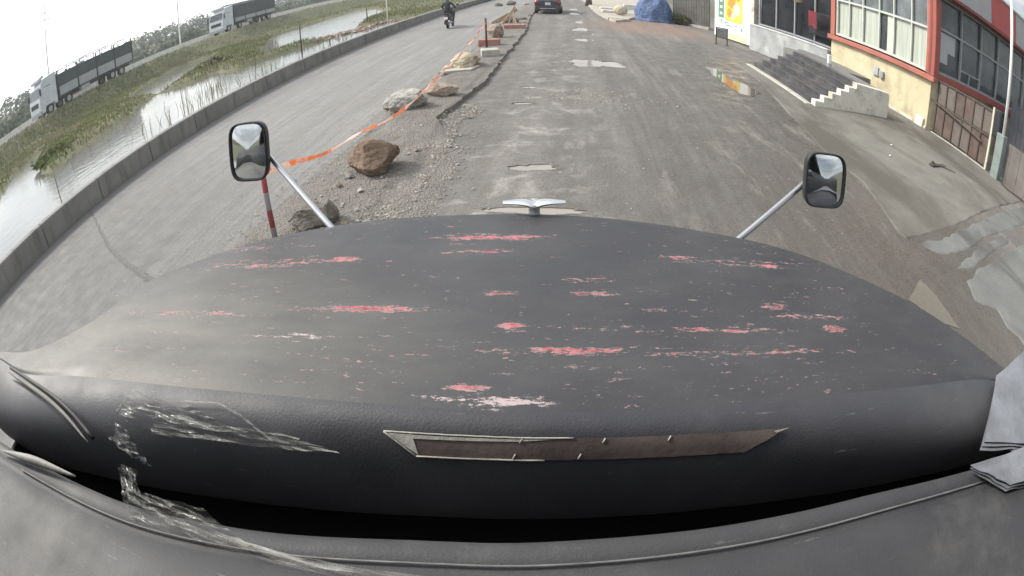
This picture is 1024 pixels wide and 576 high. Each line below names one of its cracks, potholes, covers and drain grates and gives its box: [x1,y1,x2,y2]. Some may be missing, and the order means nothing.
crack [90,211,155,283]
